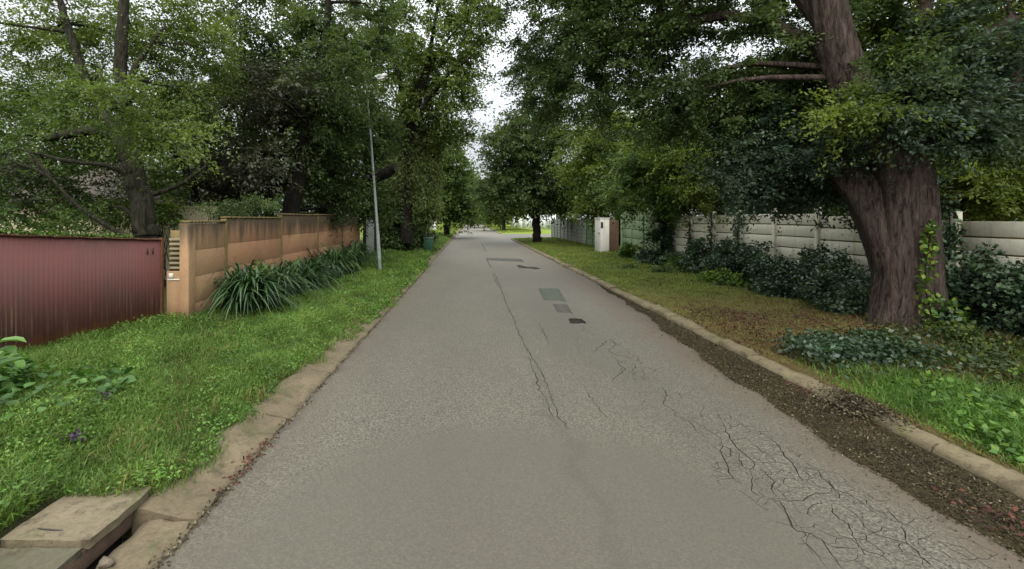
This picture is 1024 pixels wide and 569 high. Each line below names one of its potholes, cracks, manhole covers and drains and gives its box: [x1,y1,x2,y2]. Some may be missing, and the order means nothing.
crack [493,274,566,427]
crack [577,326,668,394]
